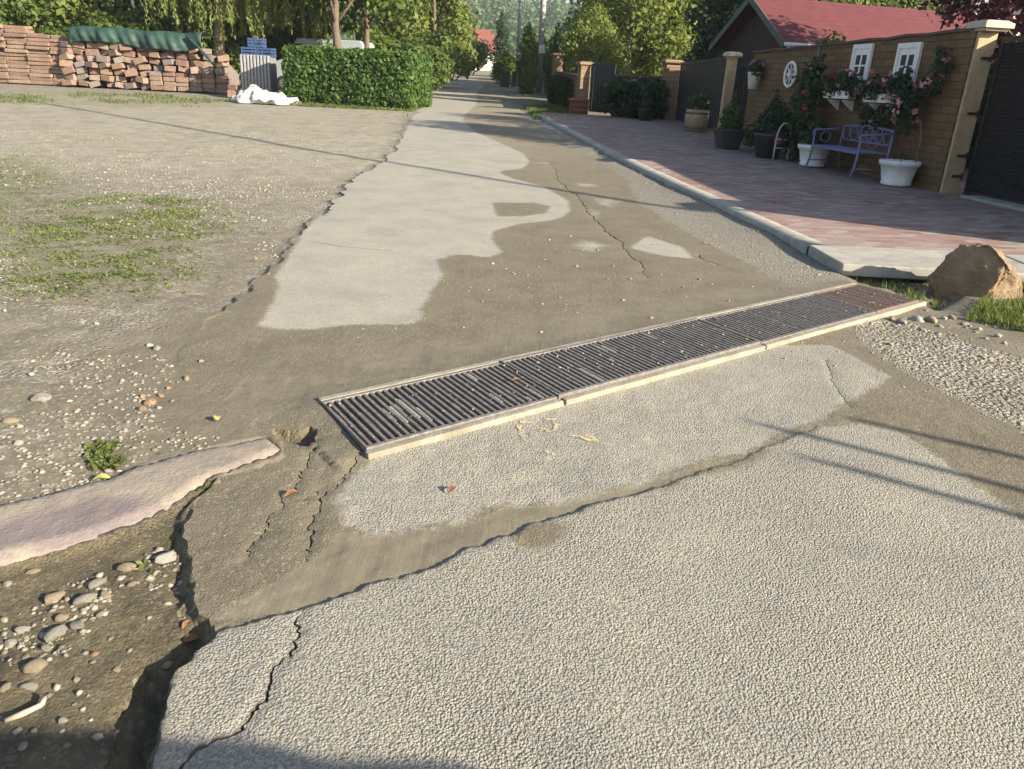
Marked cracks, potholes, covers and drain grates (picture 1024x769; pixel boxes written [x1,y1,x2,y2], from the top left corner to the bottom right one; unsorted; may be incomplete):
crack [241,440,364,563]
crack [323,133,403,215]
pothole [271,426,318,446]
drain grate [318,282,927,460]
crack [551,166,646,277]
crack [179,611,303,769]
